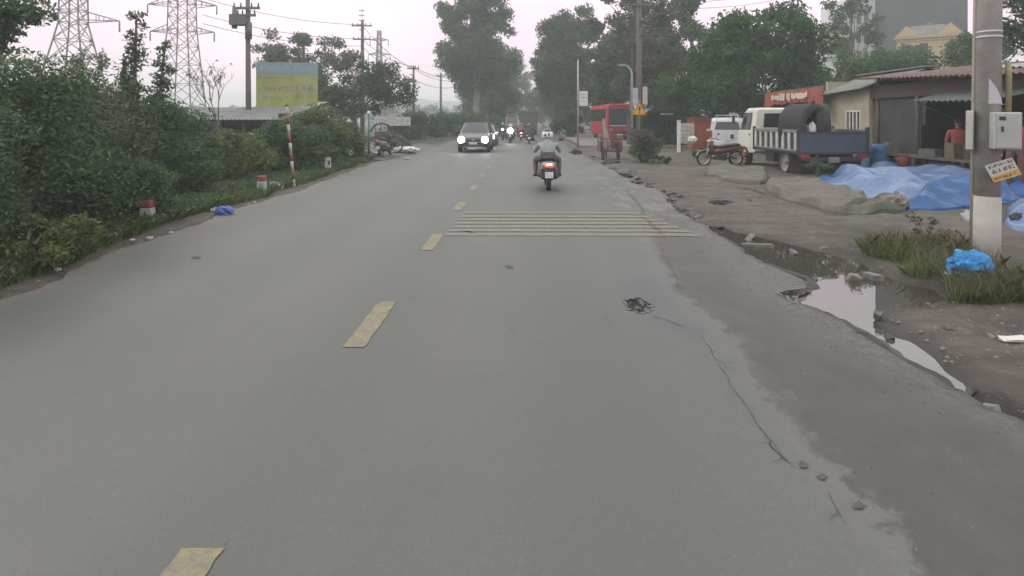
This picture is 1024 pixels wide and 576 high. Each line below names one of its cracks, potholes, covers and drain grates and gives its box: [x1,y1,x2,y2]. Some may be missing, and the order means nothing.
pothole [623,297,654,313]
crack [653,316,795,468]
